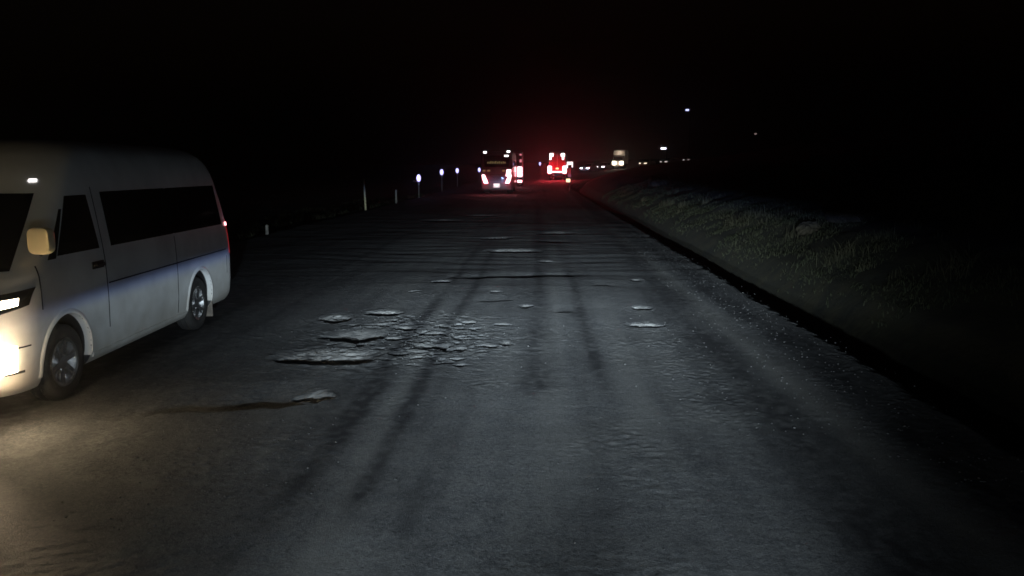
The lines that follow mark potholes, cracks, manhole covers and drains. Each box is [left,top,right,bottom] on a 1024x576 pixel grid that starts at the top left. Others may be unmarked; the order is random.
pothole [360,309,410,318]
pothole [286,386,342,405]
pothole [446,355,468,363]
pothole [392,349,417,357]
pothole [497,339,515,347]
pothole [257,344,398,369]
pothole [449,345,470,353]
pothole [618,321,670,329]
pothole [412,342,461,351]
pothole [311,312,360,325]
pothole [307,326,401,346]
